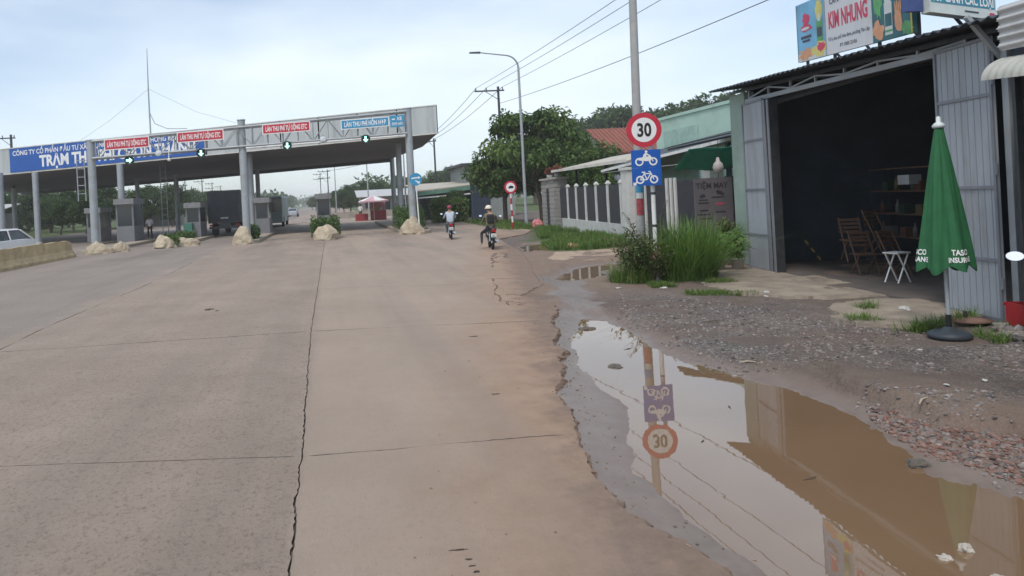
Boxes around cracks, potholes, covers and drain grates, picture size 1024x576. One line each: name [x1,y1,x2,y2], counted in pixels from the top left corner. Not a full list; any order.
crack [0,241,563,576]
